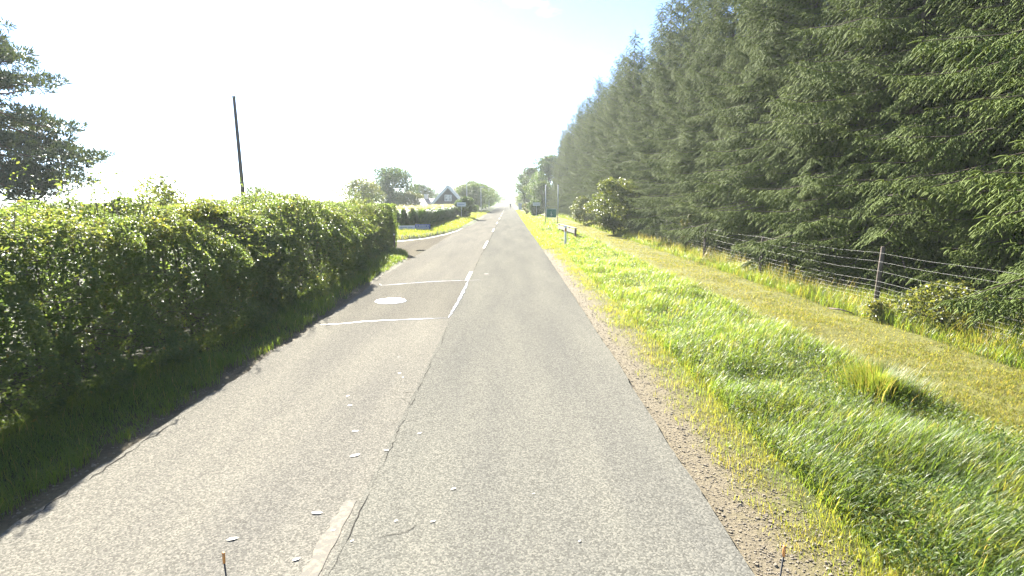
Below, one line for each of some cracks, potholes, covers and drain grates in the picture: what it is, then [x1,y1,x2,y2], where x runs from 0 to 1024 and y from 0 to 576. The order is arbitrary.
crack [332,321,449,568]
